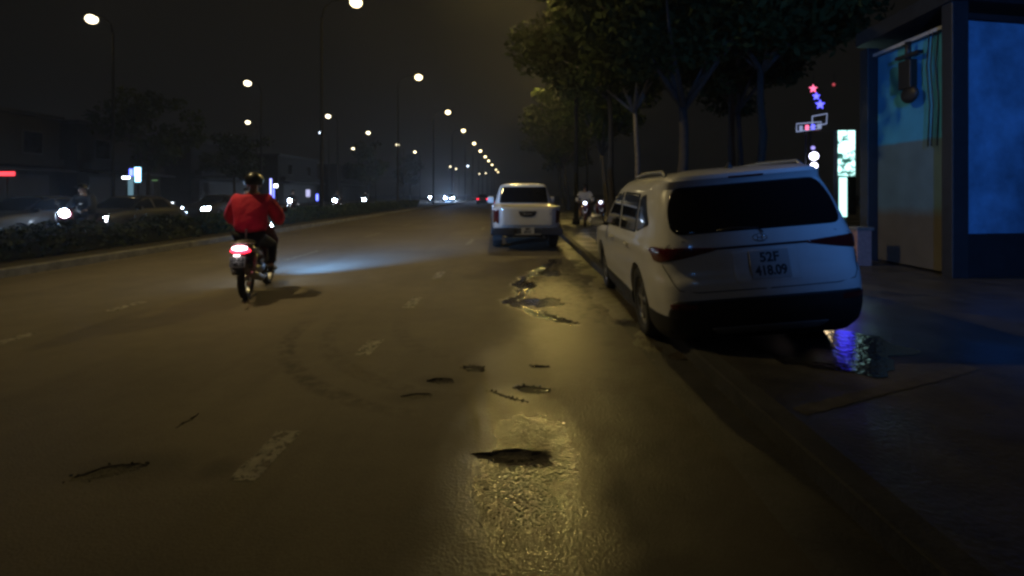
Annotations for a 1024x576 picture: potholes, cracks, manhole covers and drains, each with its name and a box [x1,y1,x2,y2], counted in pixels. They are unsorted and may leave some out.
pothole [470,446,554,467]
pothole [460,364,485,372]
pothole [509,296,572,310]
crack [486,389,529,403]
pothole [512,384,555,394]
